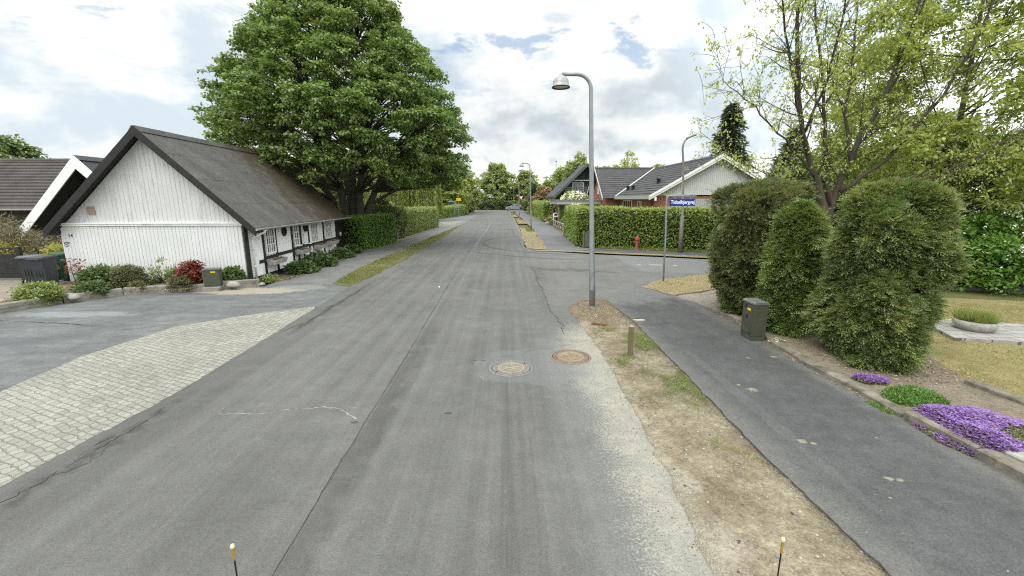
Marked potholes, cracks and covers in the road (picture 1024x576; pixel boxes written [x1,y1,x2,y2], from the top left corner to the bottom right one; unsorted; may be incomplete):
manhole cover [550,350,591,365]
manhole cover [489,360,533,377]
crack [219,278,454,575]
crack [0,413,158,503]
crack [522,265,620,334]
